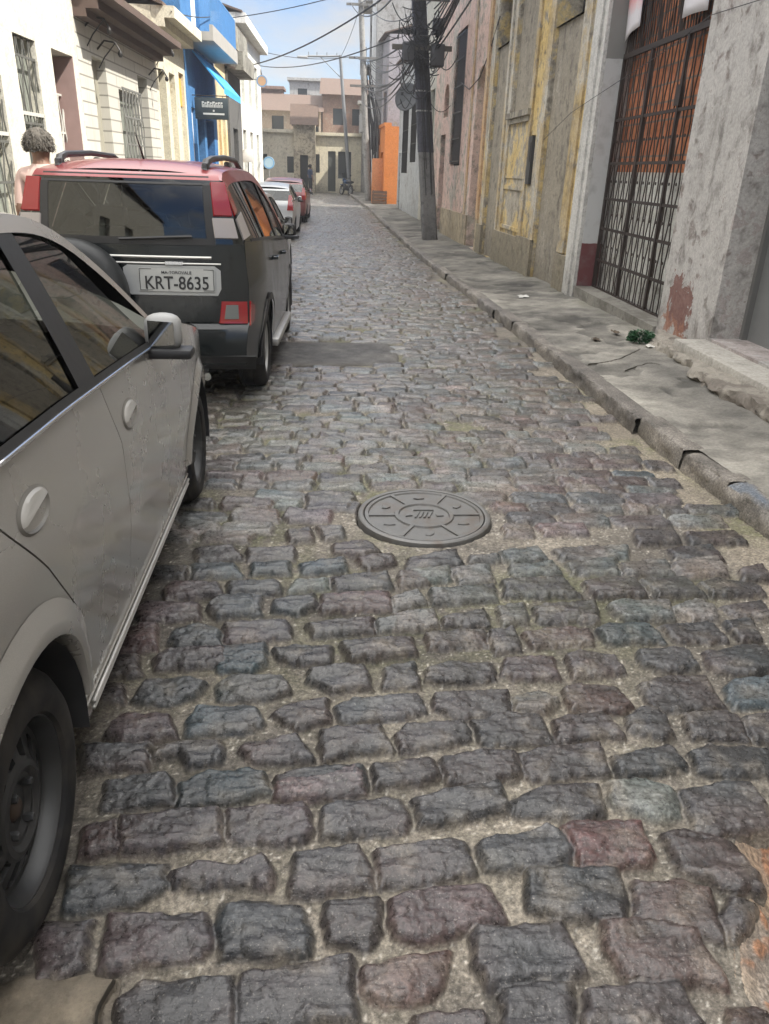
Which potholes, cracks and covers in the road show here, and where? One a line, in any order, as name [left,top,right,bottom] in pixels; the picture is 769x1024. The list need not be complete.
crack [588,349,655,371]
manhole cover [357,489,490,548]
